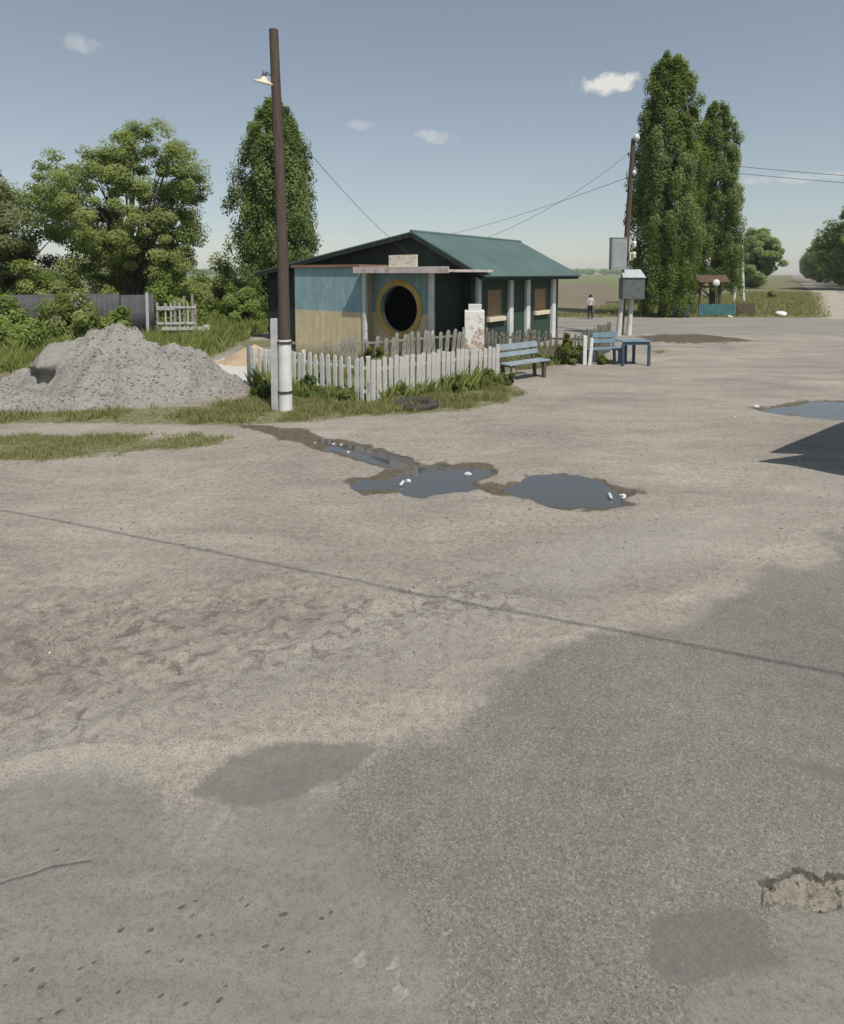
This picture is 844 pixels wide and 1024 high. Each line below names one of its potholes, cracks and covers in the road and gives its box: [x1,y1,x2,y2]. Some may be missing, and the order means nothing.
pothole [744,853,844,927]
crack [0,851,95,891]
